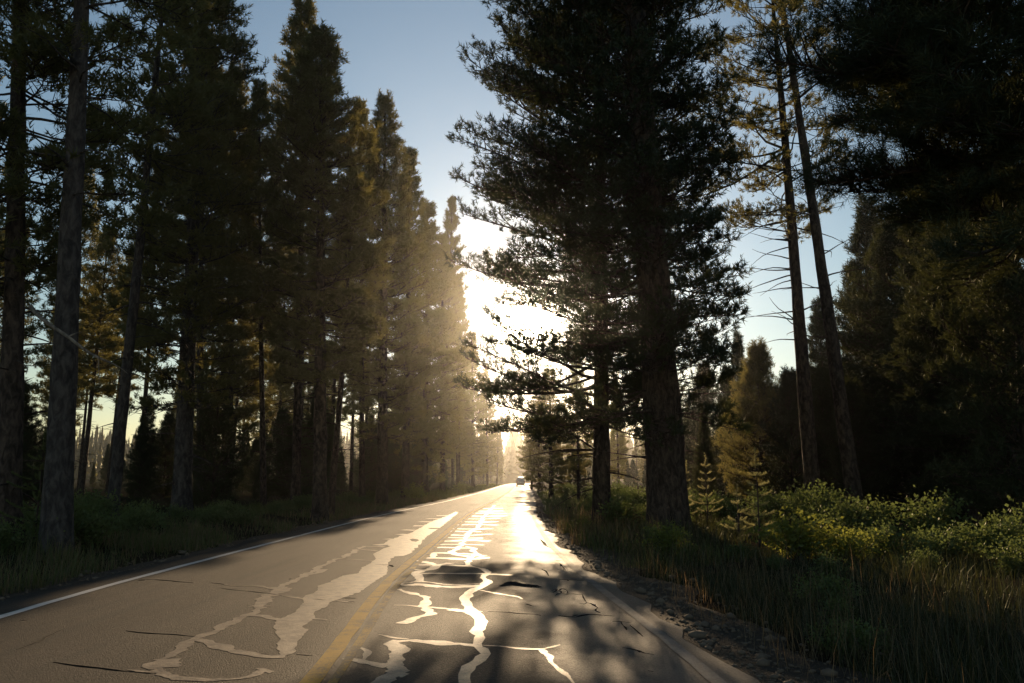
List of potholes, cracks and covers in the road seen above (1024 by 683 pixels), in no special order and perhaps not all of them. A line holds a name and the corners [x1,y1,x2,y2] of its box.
crack [541,540,654,672]
